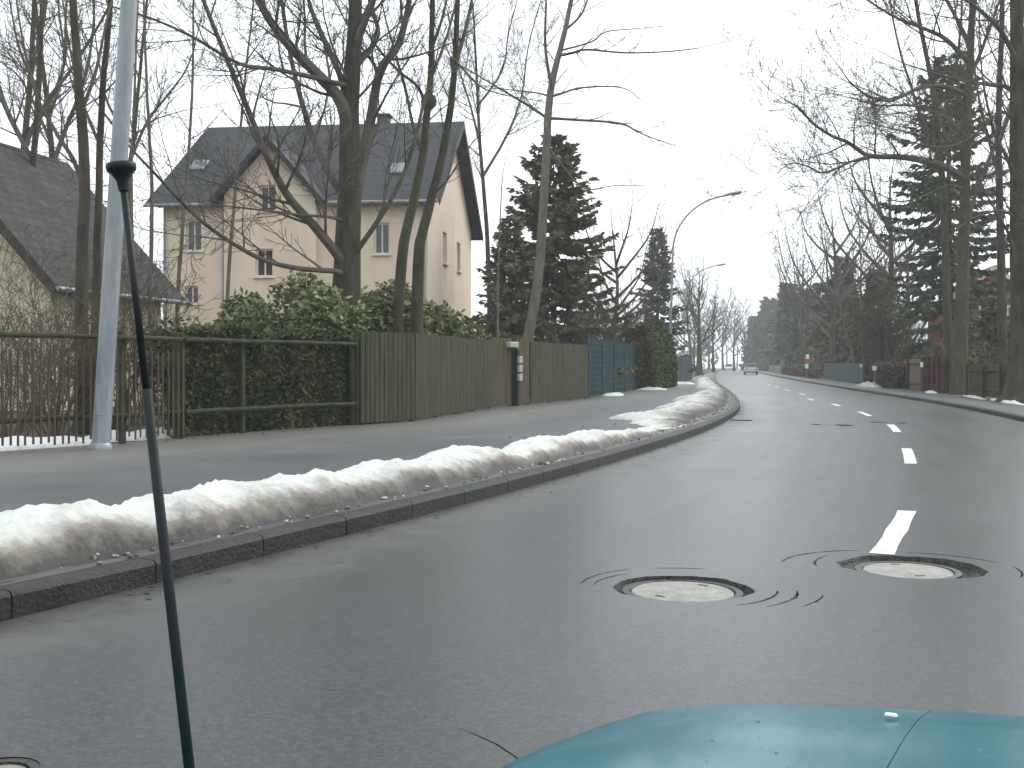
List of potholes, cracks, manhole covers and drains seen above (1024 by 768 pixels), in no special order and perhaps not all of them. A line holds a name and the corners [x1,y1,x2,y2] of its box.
manhole cover [622,579,743,602]
manhole cover [854,561,962,580]
utility cover [0,758,41,768]
crack [781,550,1024,578]
crack [581,568,823,607]
